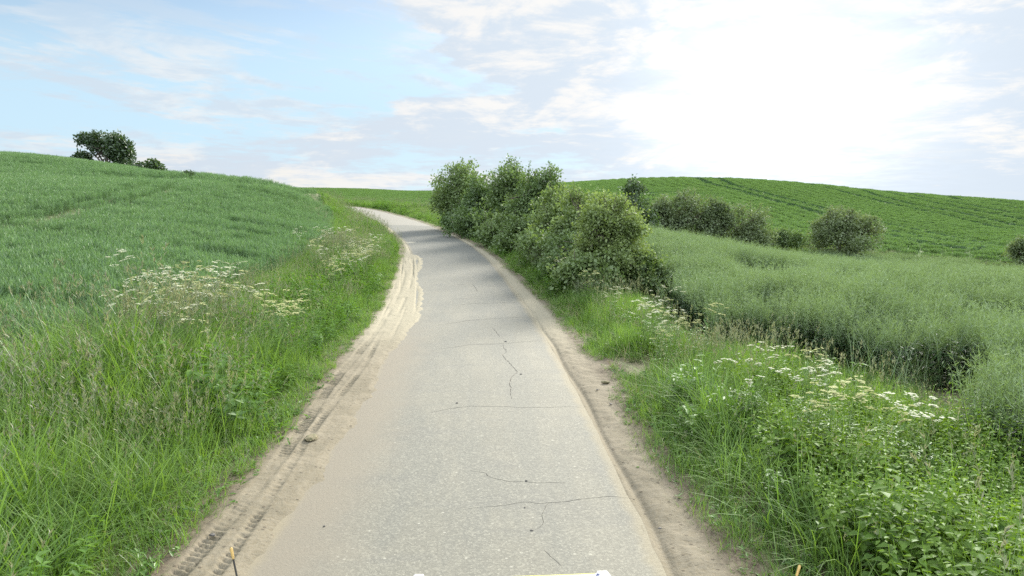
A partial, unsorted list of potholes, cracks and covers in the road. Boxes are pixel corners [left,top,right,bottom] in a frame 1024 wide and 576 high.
crack [436,285,580,412]
crack [470,496,635,528]
